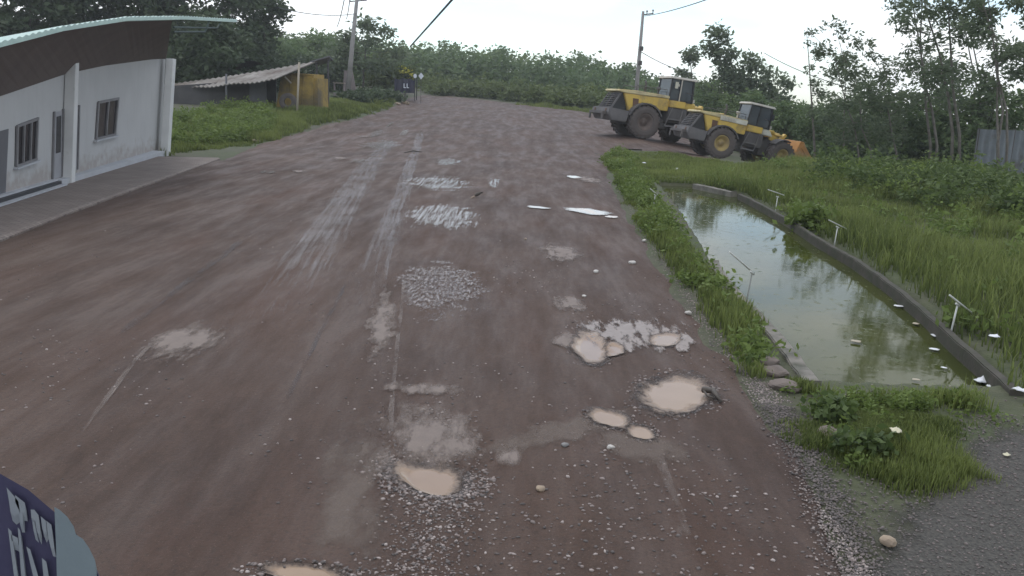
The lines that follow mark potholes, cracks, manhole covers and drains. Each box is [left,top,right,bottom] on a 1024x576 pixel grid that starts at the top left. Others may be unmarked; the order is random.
pothole [603,342,625,357]
pothole [582,318,684,352]
pothole [627,425,655,440]
pothole [392,459,466,496]
pothole [676,333,693,351]
pothole [637,374,718,417]
pothole [589,407,630,428]
pothole [366,293,394,353]
pothole [154,326,218,356]
pothole [543,245,579,261]
pothole [554,333,574,347]
pothole [378,406,479,467]
